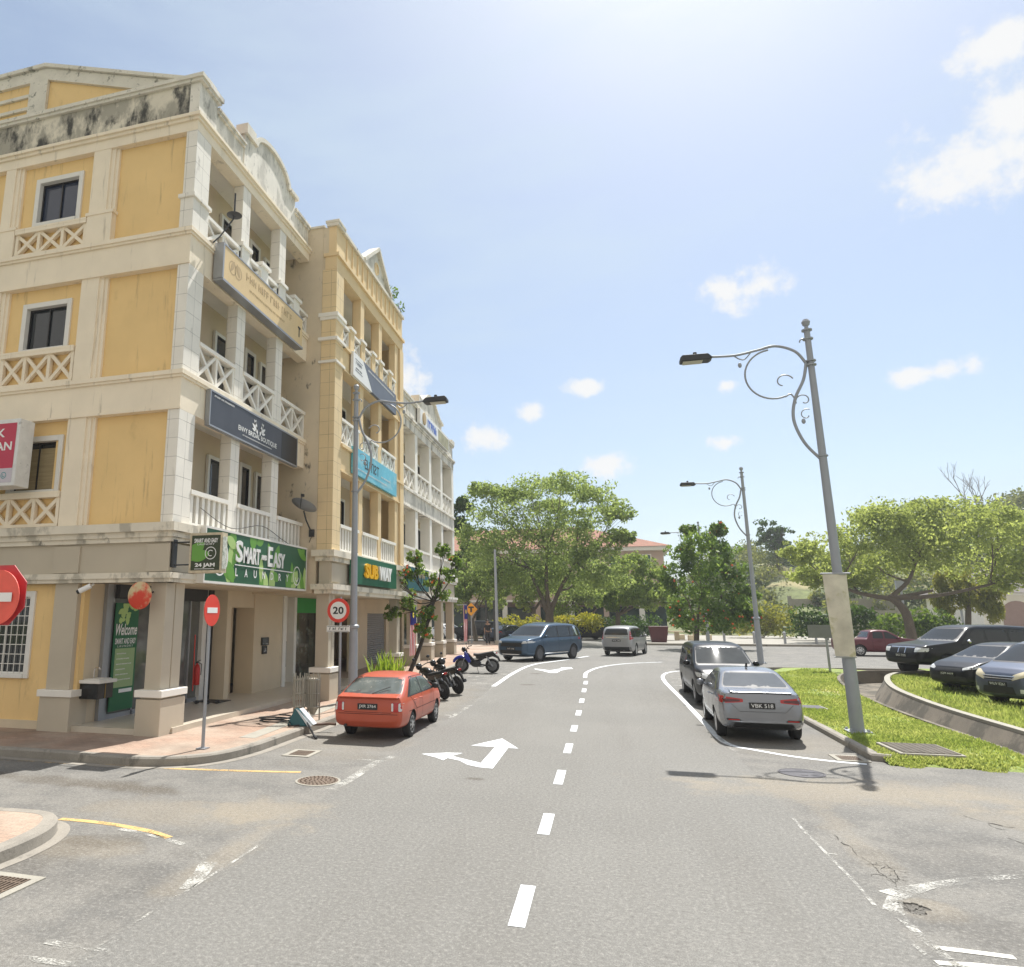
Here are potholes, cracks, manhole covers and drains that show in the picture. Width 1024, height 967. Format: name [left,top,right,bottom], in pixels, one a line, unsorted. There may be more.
manhole cover [295,776,341,786]
manhole cover [777,768,826,778]
pothole [893,901,932,916]
drain grate [828,754,872,763]
crack [836,836,910,887]
drain grate [0,871,46,900]
drain grate [281,749,322,758]
